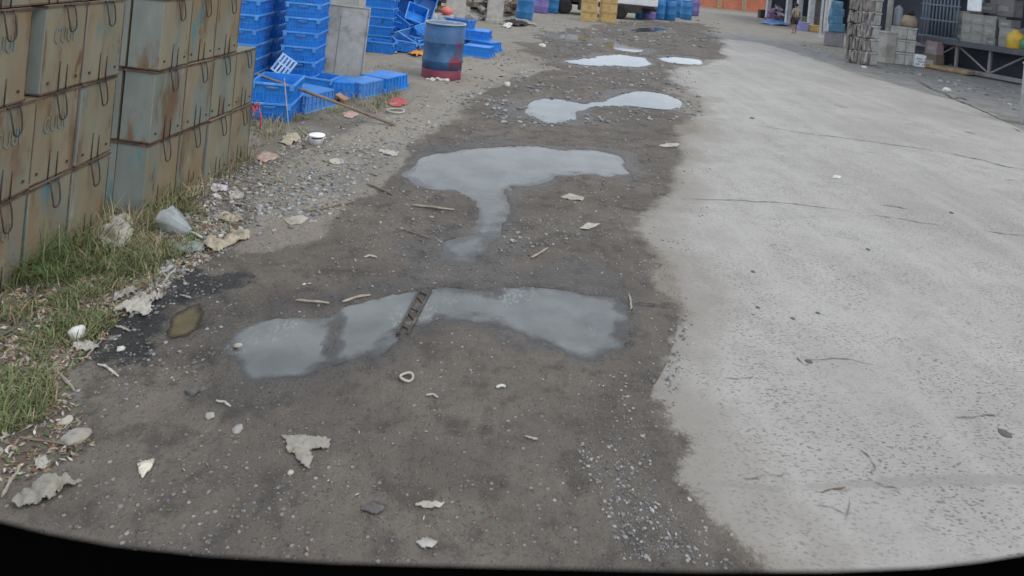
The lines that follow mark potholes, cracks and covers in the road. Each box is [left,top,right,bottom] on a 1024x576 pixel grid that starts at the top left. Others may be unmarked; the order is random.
pothole [391,144,638,272]
crack [759,125,1024,182]
pothole [559,54,657,68]
pothole [521,89,687,124]
pothole [204,281,645,402]
pothole [654,56,710,66]
